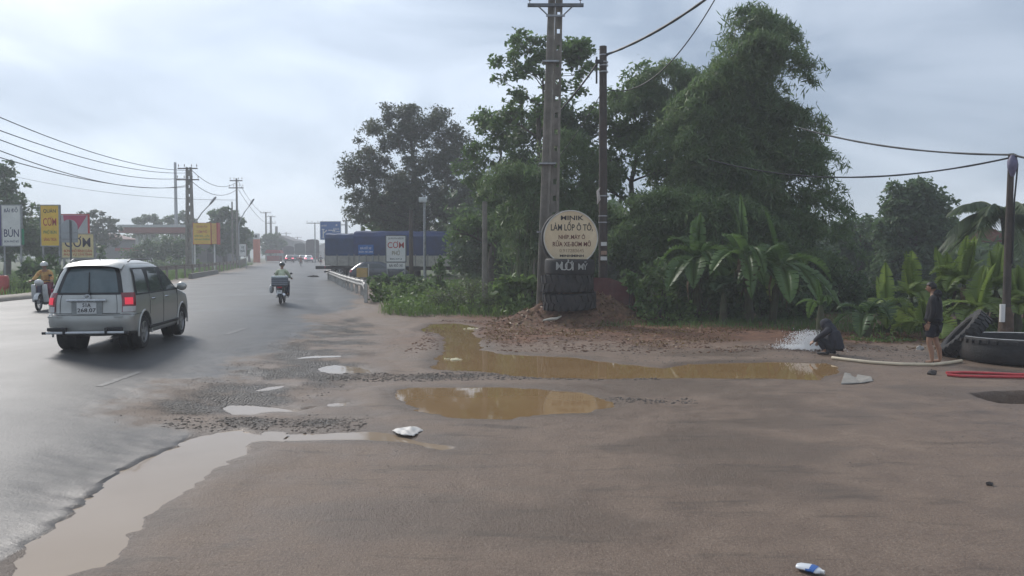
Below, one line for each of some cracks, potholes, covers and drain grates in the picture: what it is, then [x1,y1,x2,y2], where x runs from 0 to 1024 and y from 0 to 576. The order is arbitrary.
pothole [249,384,291,392]
pothole [0,424,289,576]
pothole [215,402,336,415]
pothole [321,399,355,407]
pothole [311,363,378,374]
pothole [384,384,624,421]
